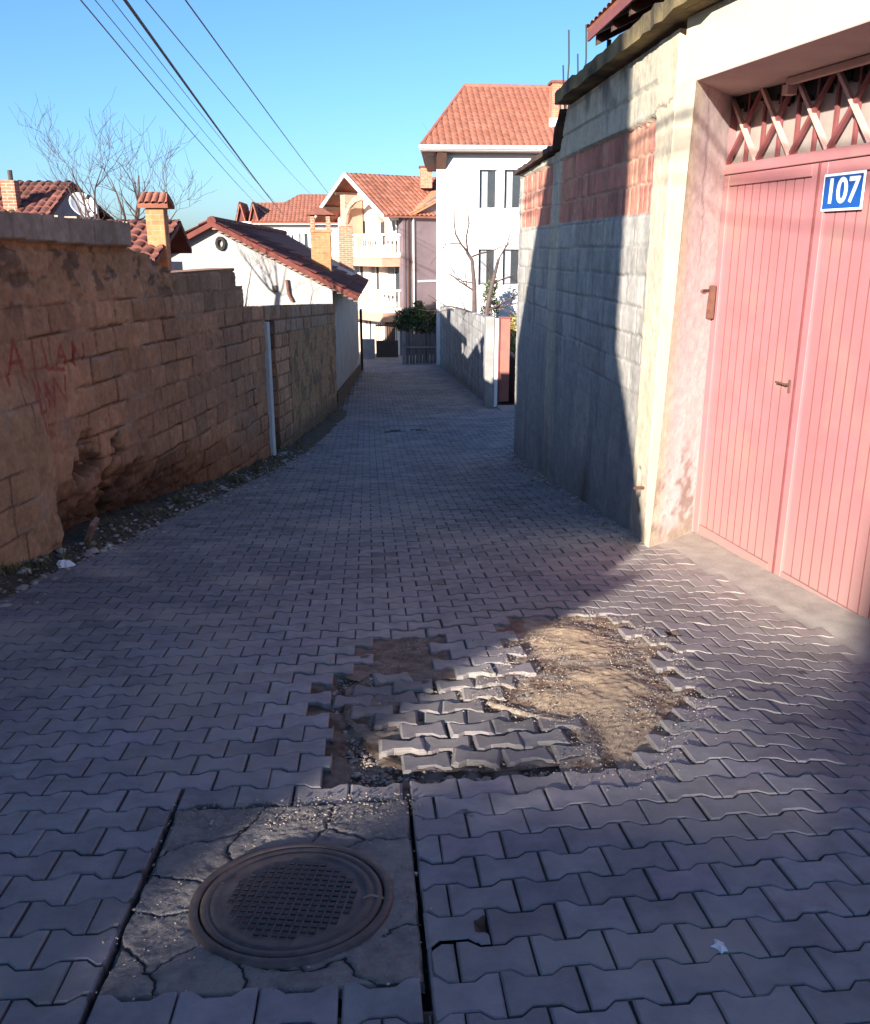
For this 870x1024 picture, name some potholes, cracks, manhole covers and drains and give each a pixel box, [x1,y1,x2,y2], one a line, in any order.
crack [121,803,425,999]
pothole [295,659,618,804]
manhole cover [188,842,393,971]
pothole [485,613,704,785]
